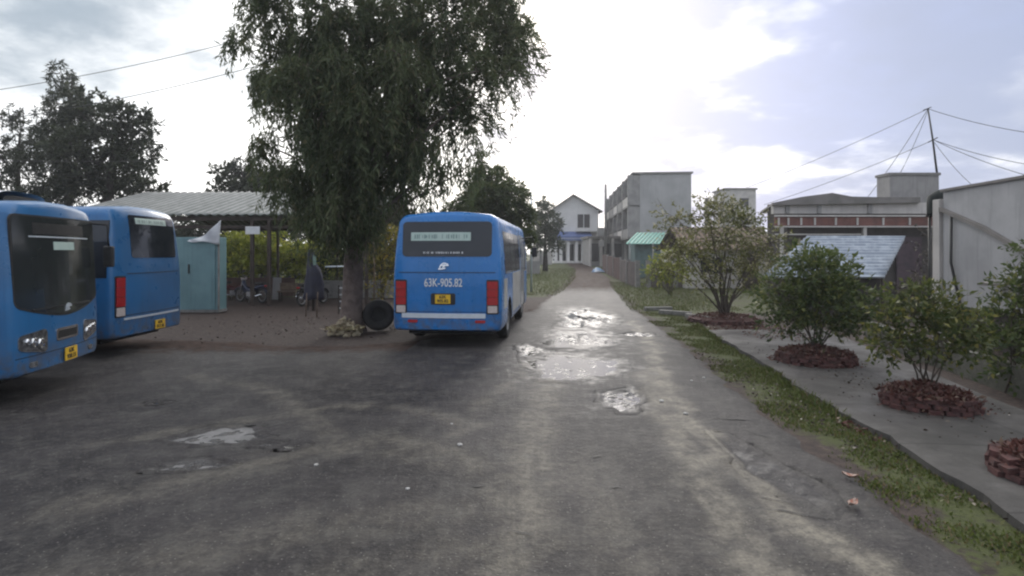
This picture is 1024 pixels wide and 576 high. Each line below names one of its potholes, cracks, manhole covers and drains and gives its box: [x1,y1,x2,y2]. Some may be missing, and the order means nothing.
pothole [151,424,283,448]
pothole [593,386,649,416]
pothole [551,306,624,335]
pothole [530,331,630,351]
pothole [516,351,634,385]
crack [714,417,771,472]
pothole [512,343,555,361]
